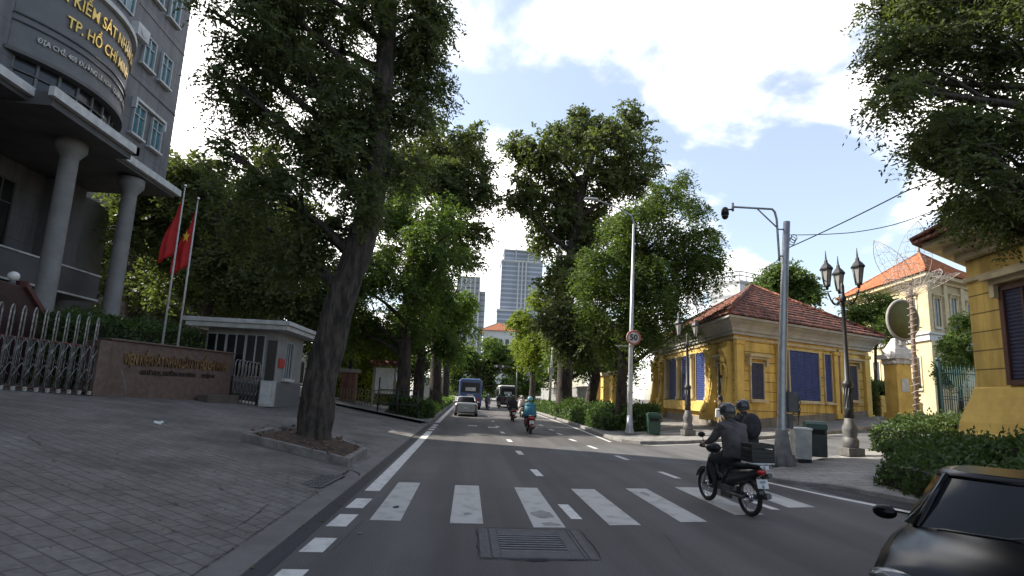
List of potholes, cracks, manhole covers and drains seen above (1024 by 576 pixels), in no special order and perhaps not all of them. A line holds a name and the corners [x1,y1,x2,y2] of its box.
drain grate [478,528,598,560]
